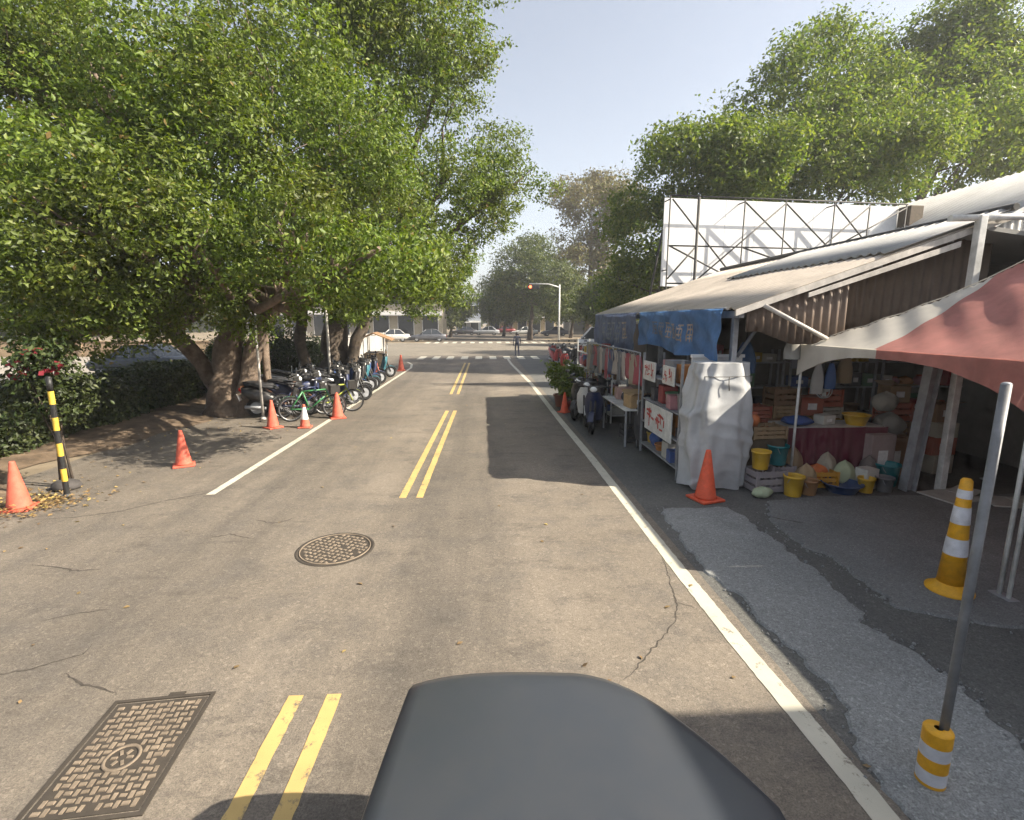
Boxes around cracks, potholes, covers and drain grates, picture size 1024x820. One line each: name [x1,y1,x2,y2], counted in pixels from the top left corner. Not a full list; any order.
manhole cover [15,691,216,820]
crack [0,642,111,692]
manhole cover [294,533,375,567]
crack [32,564,98,572]
crack [619,555,692,682]
